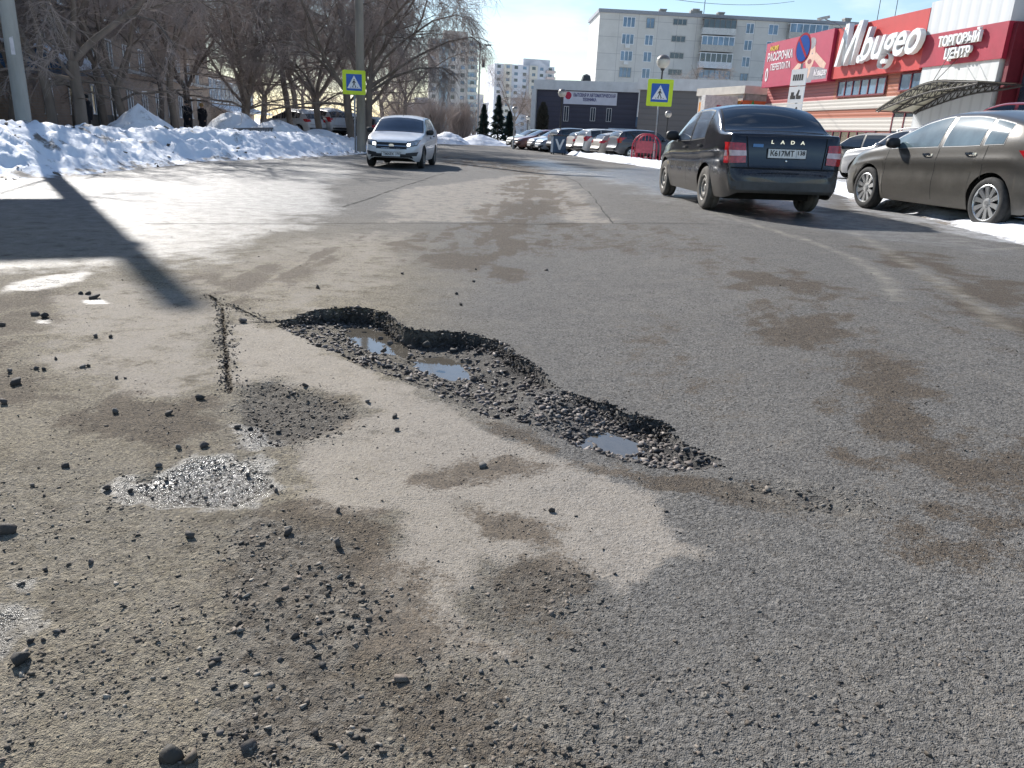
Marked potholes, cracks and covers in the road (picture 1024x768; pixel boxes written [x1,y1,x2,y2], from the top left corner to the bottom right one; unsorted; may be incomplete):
pothole [123,457,271,508]
crack [209,295,280,394]
pothole [271,307,568,421]
pothole [230,382,356,448]
pothole [508,384,726,473]
